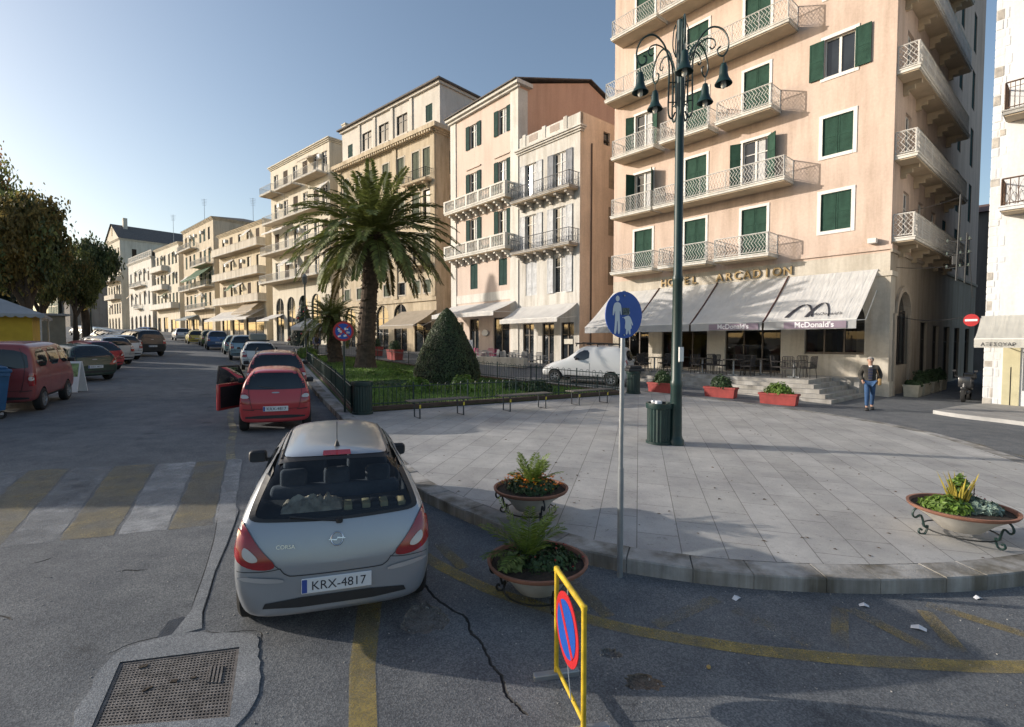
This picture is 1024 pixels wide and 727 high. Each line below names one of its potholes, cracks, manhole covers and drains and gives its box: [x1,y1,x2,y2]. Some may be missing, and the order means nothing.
pothole [599,648,623,659]
pothole [624,673,665,691]
drain grate [92,648,239,727]
crack [425,585,529,716]
